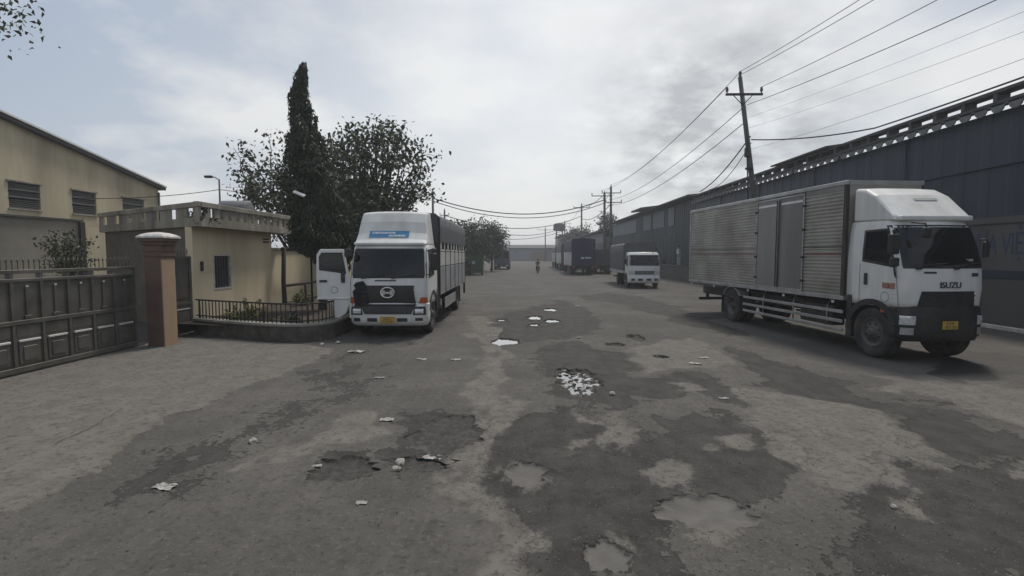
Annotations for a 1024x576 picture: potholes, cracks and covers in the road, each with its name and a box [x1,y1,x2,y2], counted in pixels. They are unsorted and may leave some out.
pothole [624,333,650,342]
pothole [487,337,524,347]
pothole [293,450,402,491]
pothole [546,365,612,401]
pothole [391,411,494,464]
pothole [564,529,652,576]
pothole [490,456,560,499]
pothole [634,487,778,542]
